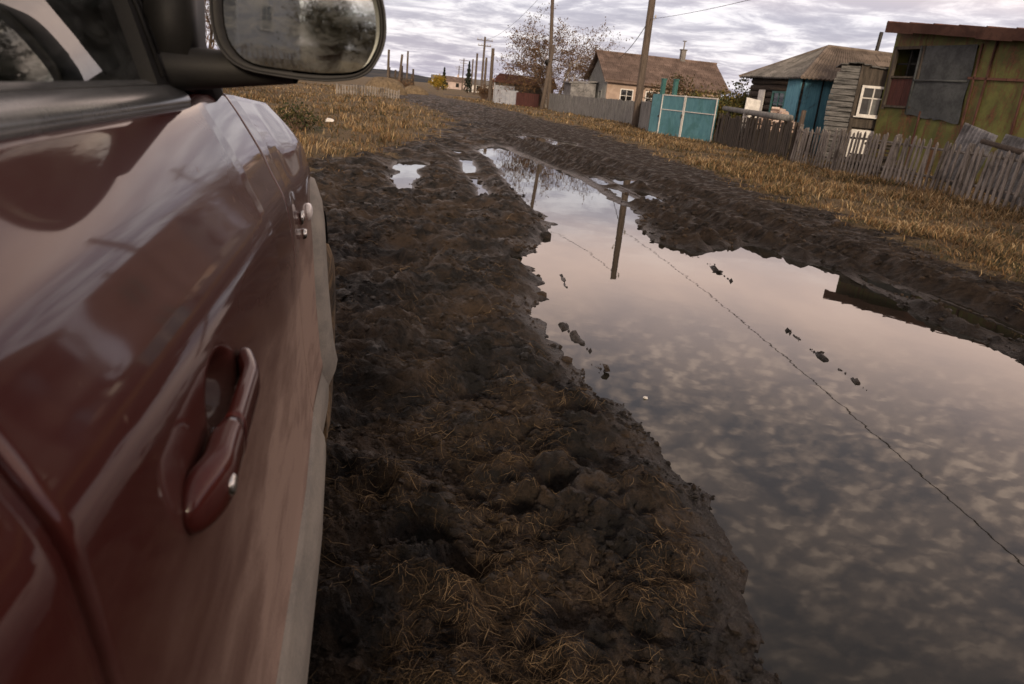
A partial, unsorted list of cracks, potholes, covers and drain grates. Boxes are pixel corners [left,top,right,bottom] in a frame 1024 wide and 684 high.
pothole [377,155,437,191]
pothole [460,139,1024,684]
pothole [452,154,484,173]
